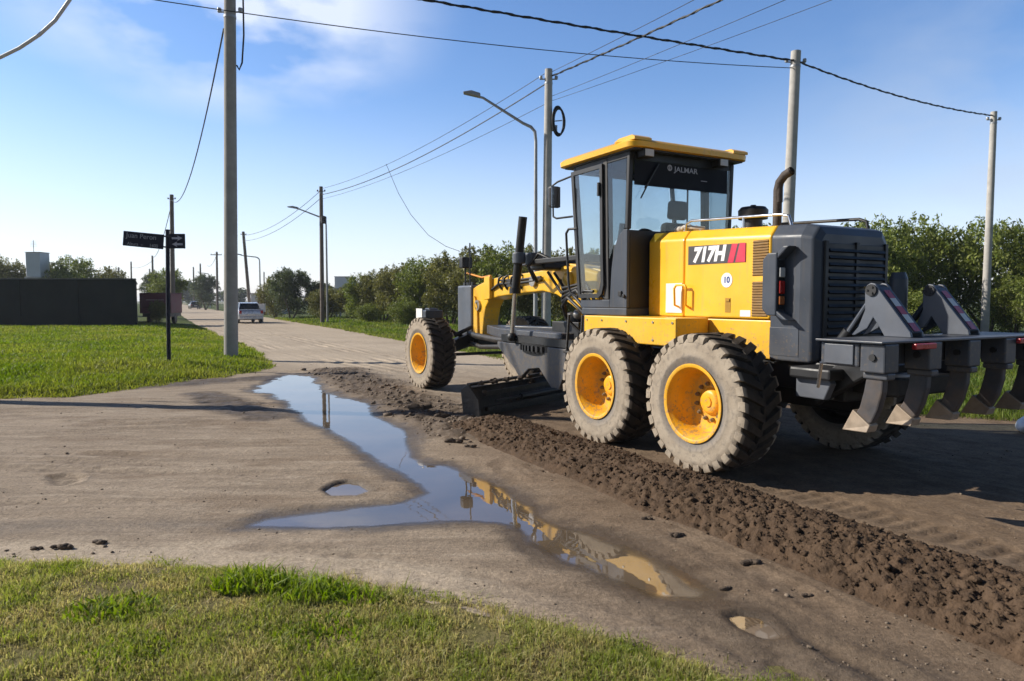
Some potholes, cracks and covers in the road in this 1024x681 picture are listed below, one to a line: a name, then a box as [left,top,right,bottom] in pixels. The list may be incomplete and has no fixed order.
pothole [315,478,377,497]
pothole [713,606,798,645]
